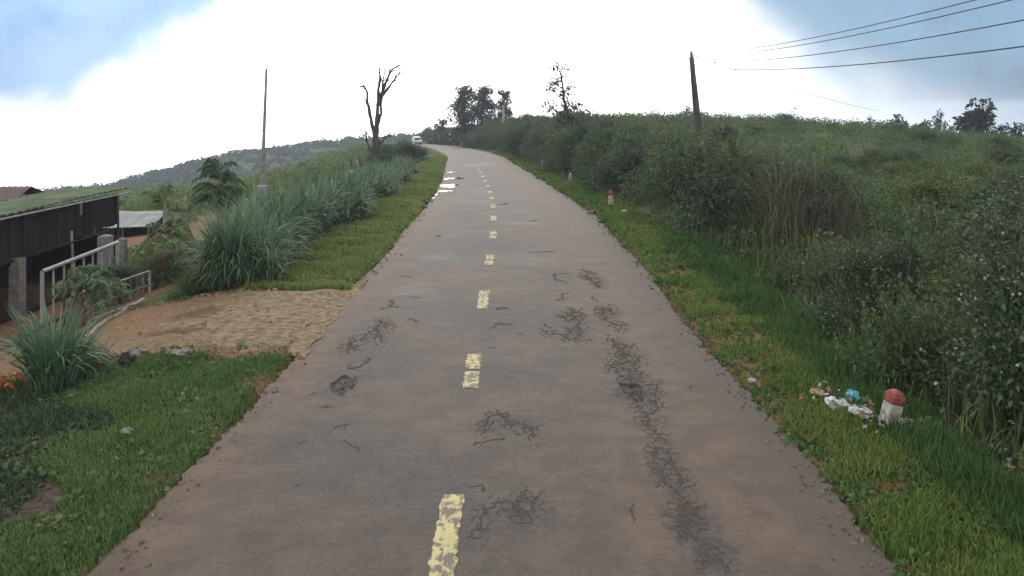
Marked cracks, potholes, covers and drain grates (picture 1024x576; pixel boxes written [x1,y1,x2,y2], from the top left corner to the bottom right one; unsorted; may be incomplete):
crack [465,484,547,539]
crack [473,409,544,447]
pothole [325,375,357,396]
crack [338,296,420,369]
crack [539,268,732,576]
pothole [618,382,644,401]
